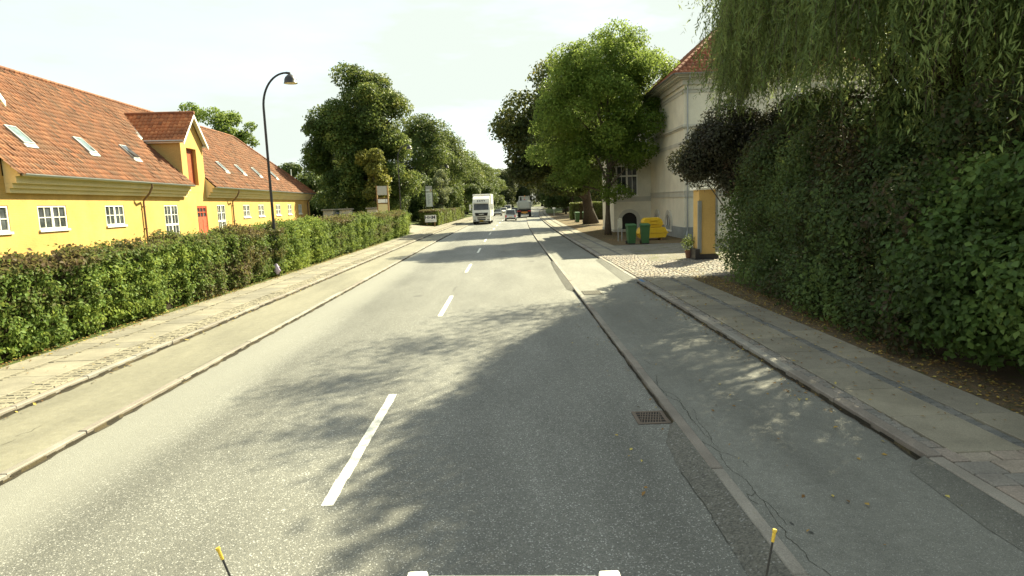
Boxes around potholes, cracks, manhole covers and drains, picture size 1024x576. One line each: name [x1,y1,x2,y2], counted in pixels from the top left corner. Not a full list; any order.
crack [647,361,831,576]
drain grate [631,410,671,424]
